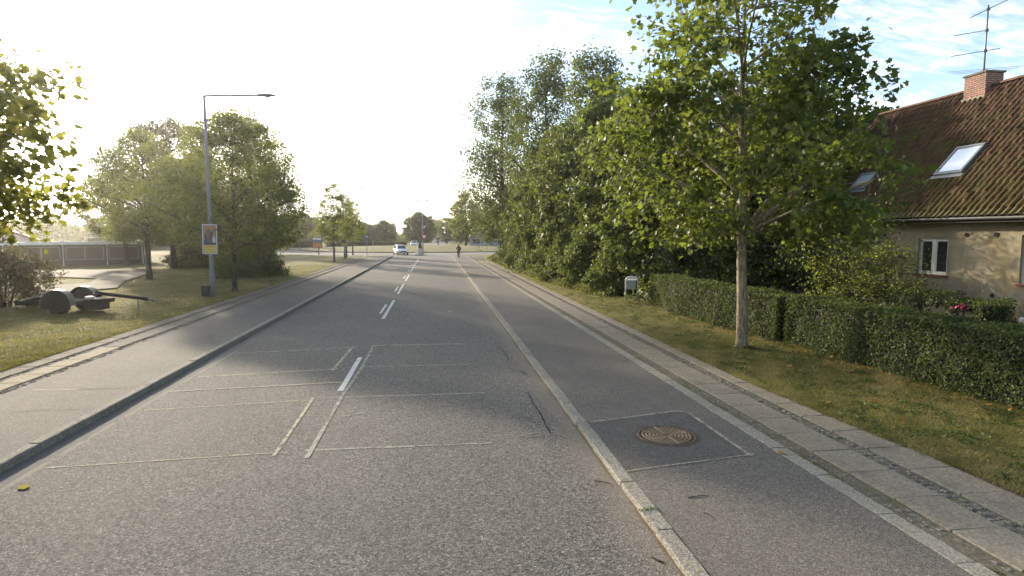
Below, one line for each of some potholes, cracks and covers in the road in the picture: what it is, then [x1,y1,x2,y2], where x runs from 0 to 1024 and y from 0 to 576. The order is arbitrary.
manhole cover [633,425,701,447]
crack [527,392,565,438]
